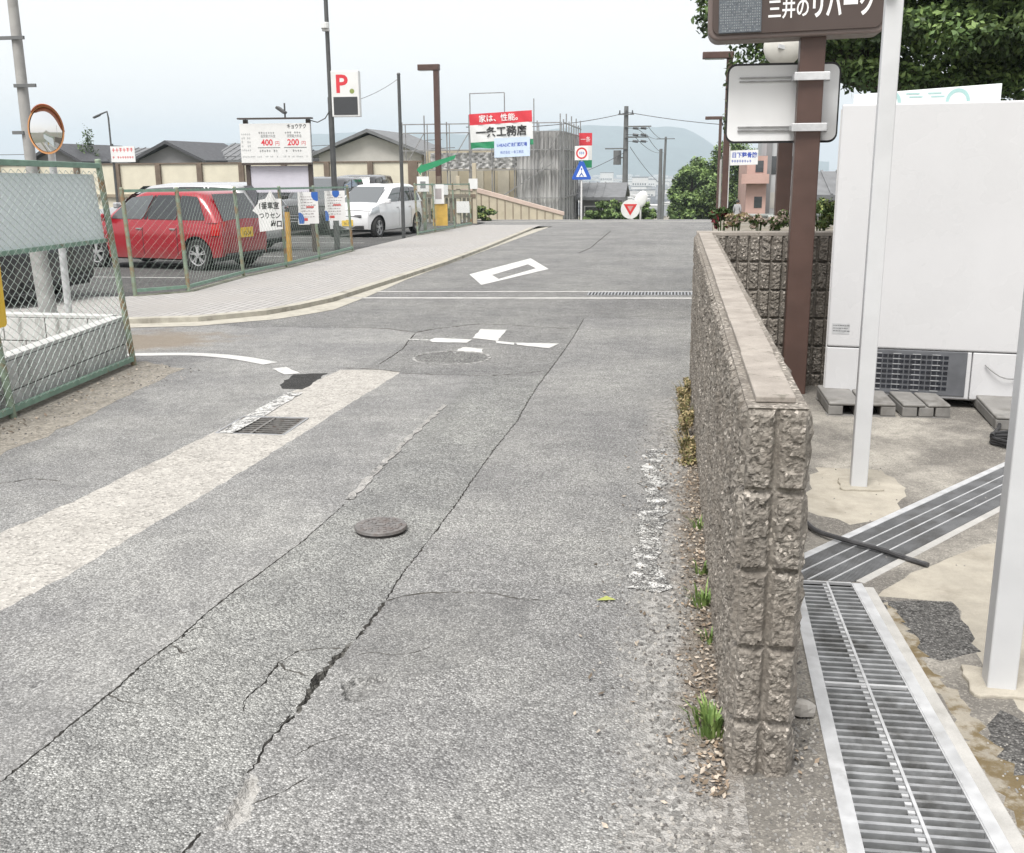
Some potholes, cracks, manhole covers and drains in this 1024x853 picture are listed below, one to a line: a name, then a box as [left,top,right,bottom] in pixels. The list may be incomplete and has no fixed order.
crack [0,504,344,782]
crack [182,319,584,853]
drain grate [215,416,309,435]
manhole cover [412,347,491,365]
manhole cover [354,517,407,539]
drain grate [801,462,1005,587]
drain grate [800,580,1024,853]
